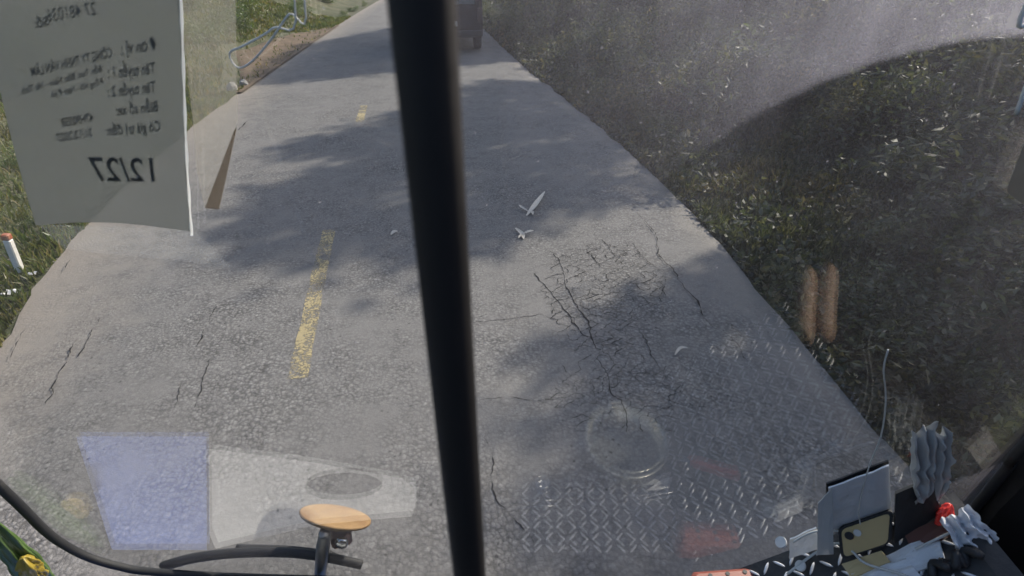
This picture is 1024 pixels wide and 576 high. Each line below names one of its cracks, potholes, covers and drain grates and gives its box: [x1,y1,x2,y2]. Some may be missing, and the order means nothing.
crack [174,306,217,407]
crack [476,216,766,432]
crack [485,439,534,548]
crack [45,317,101,403]
